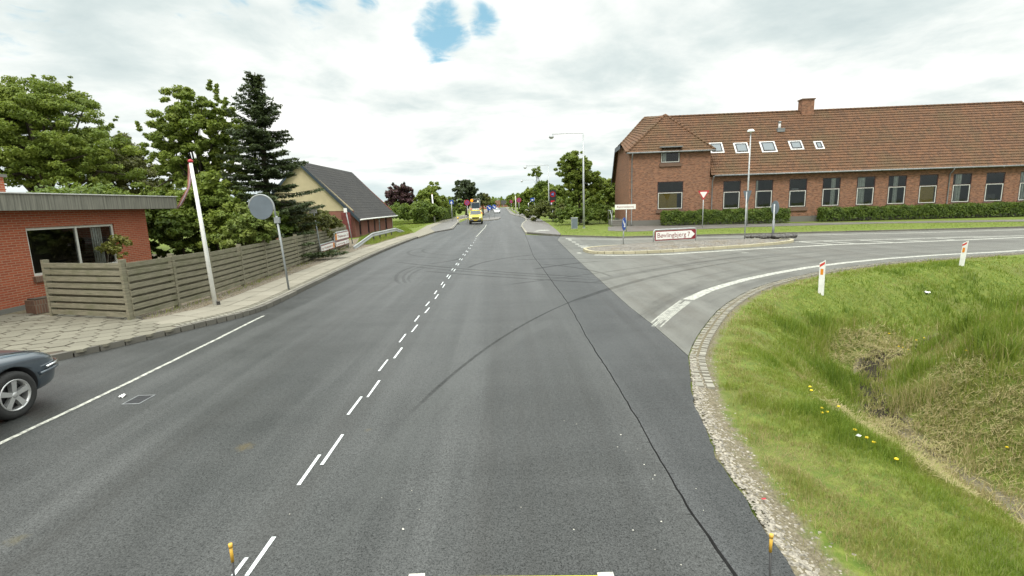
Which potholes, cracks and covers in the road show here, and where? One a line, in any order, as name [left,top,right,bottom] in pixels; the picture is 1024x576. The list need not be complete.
drain grate [121,395,155,405]
